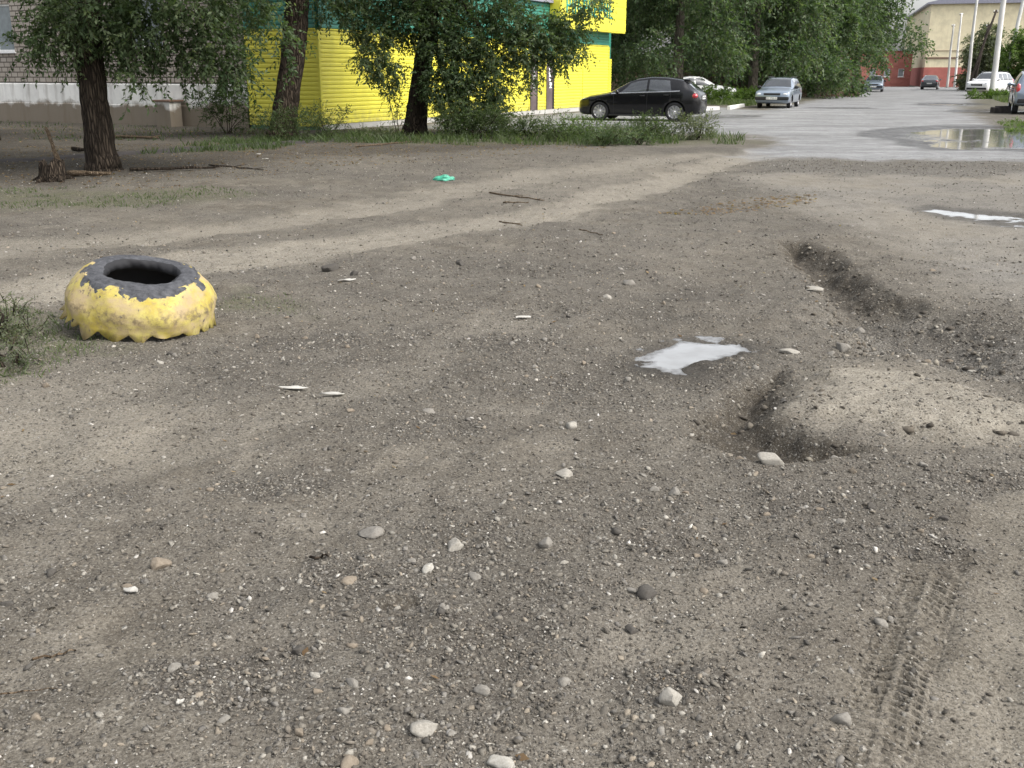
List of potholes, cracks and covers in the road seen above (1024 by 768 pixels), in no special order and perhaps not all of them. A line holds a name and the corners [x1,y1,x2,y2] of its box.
pothole [686,363,873,467]
pothole [621,332,771,380]
pothole [747,235,1024,402]
pothole [907,204,1024,228]
